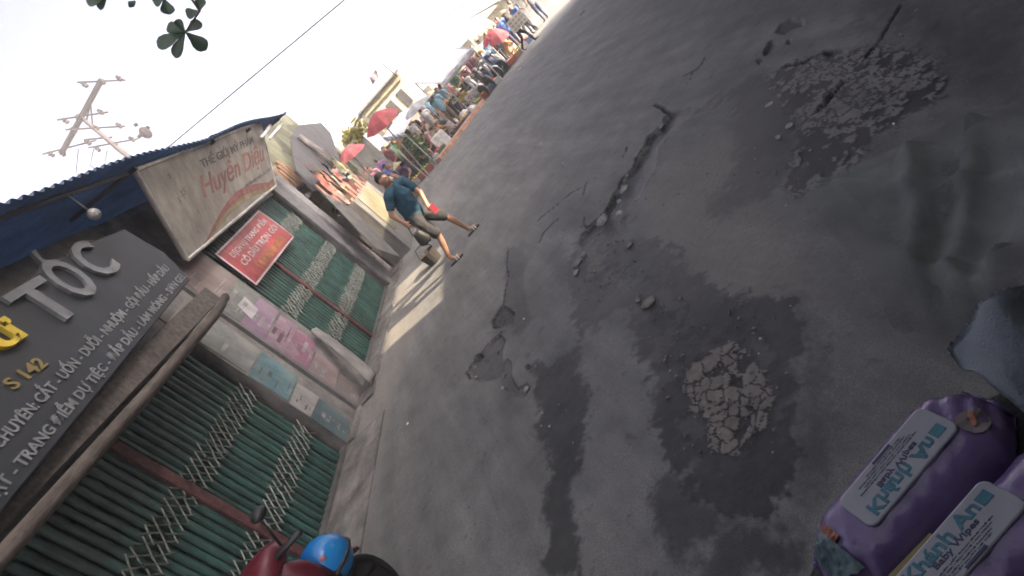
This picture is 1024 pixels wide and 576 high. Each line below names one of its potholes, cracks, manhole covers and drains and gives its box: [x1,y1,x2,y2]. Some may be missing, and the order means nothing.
pothole [469,334,506,383]
pothole [491,304,516,329]
pothole [761,39,774,58]
crack [465,248,510,380]
crack [533,103,672,244]
pothole [773,15,807,36]
crack [781,1,904,114]
crack [682,56,706,84]
